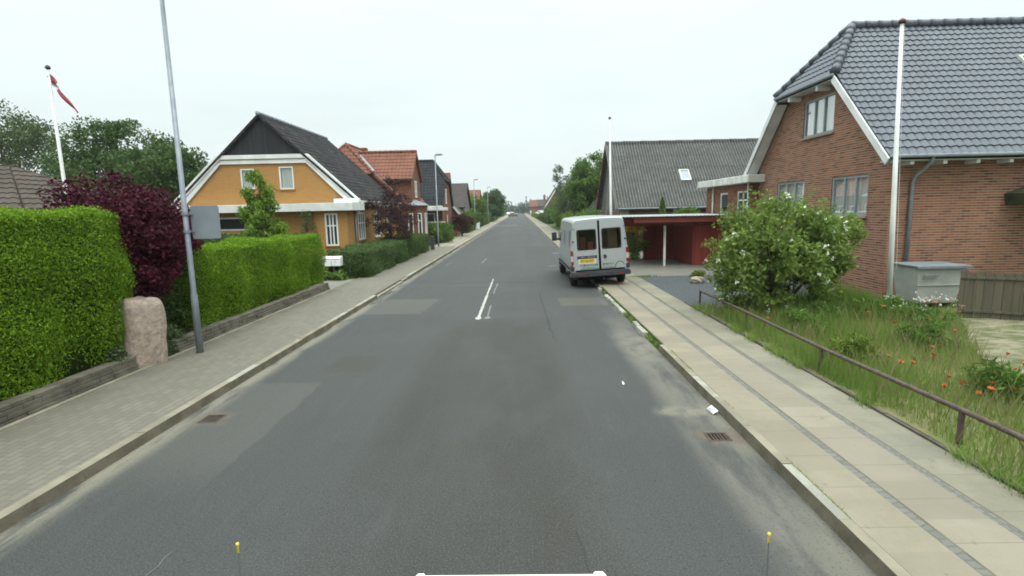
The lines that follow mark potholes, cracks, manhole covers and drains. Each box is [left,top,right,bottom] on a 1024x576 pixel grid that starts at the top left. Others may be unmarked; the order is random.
drain grate [197,414,228,423]
drain grate [703,432,733,441]
